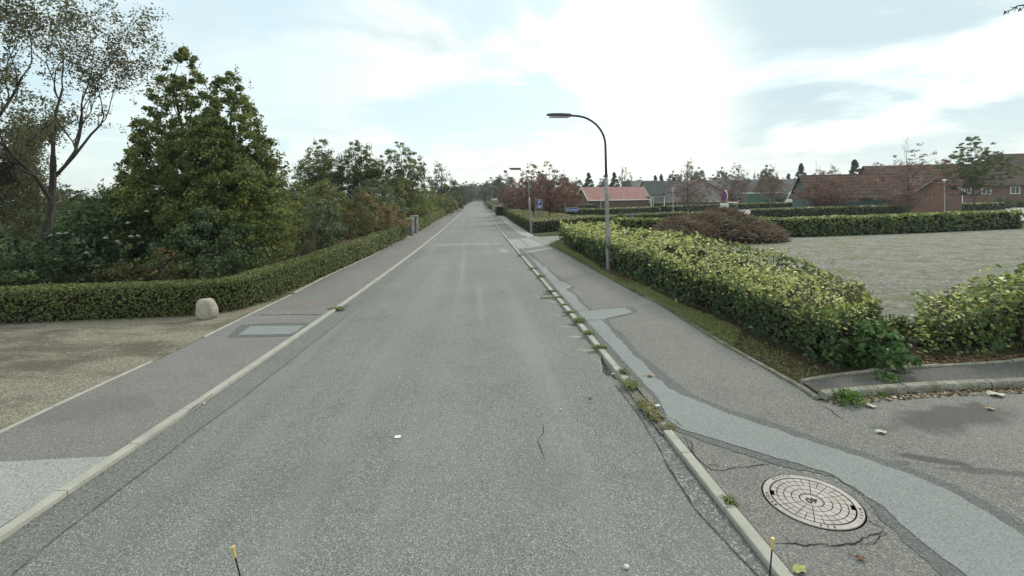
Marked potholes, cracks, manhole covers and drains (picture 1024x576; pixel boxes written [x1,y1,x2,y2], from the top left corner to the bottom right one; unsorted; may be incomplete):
manhole cover [762,475,867,532]
crack [775,519,888,546]
